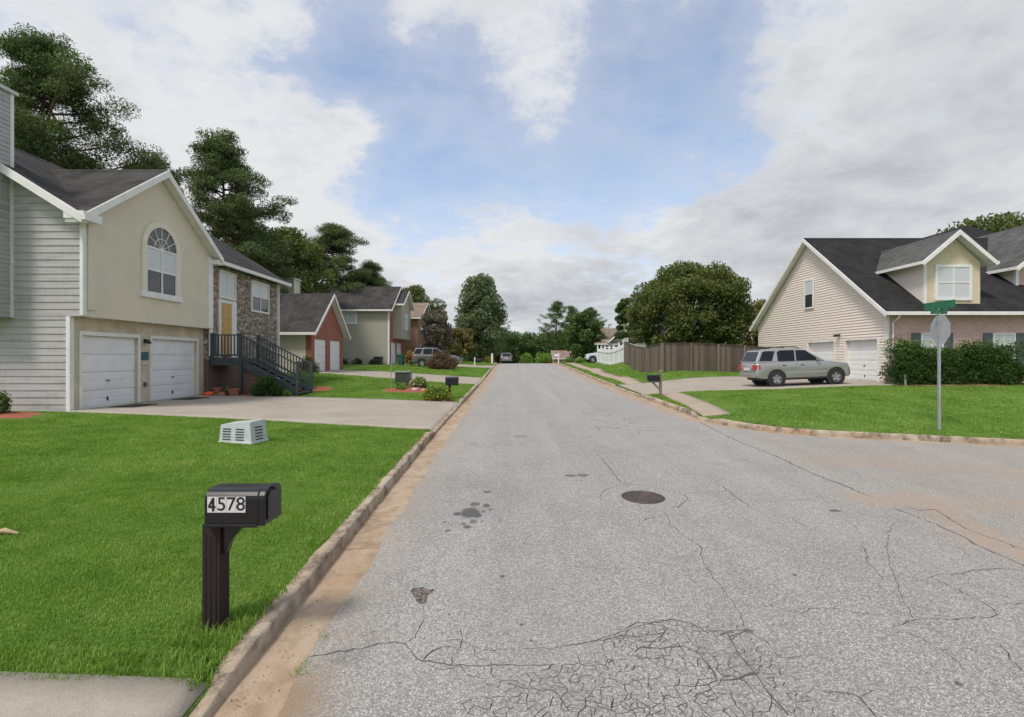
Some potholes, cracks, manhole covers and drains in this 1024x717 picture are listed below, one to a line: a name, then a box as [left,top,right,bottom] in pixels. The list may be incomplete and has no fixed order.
manhole cover [621,491,665,504]
crack [769,523,1020,674]
pothole [411,587,435,604]
crack [457,455,835,717]
crack [310,606,549,685]
